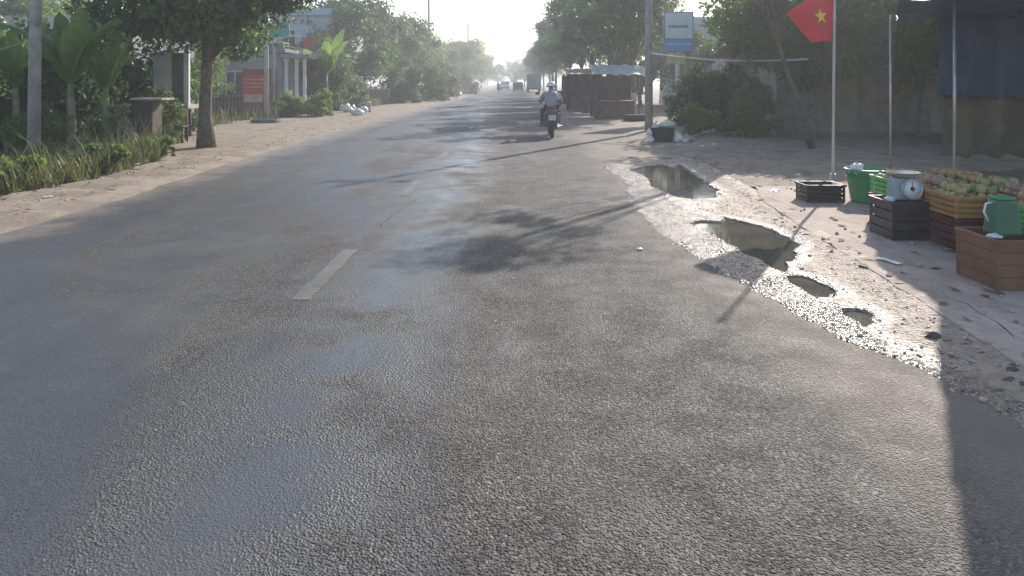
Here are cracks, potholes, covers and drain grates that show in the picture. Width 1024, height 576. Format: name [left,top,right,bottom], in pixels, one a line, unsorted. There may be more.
pothole [786,275,836,297]
pothole [630,164,719,199]
pothole [689,217,802,272]
crack [942,292,1014,338]
pothole [841,308,874,327]
